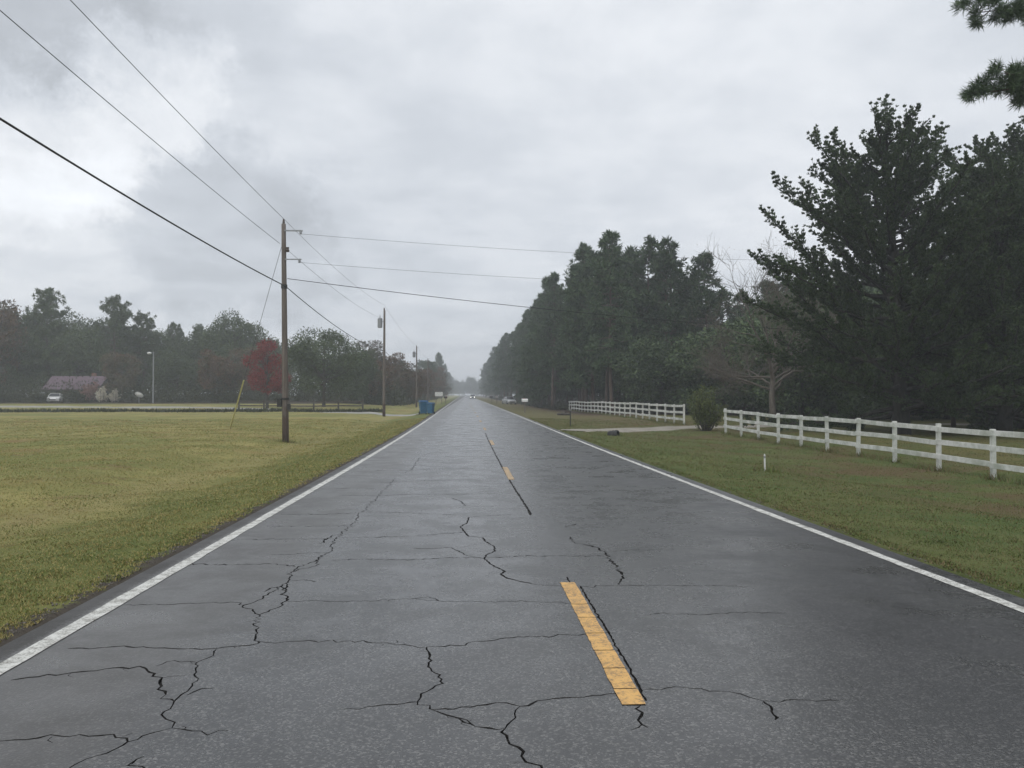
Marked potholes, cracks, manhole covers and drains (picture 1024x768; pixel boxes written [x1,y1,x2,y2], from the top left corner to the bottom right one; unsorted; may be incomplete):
crack [631,686,838,730]
crack [3,457,740,768]
